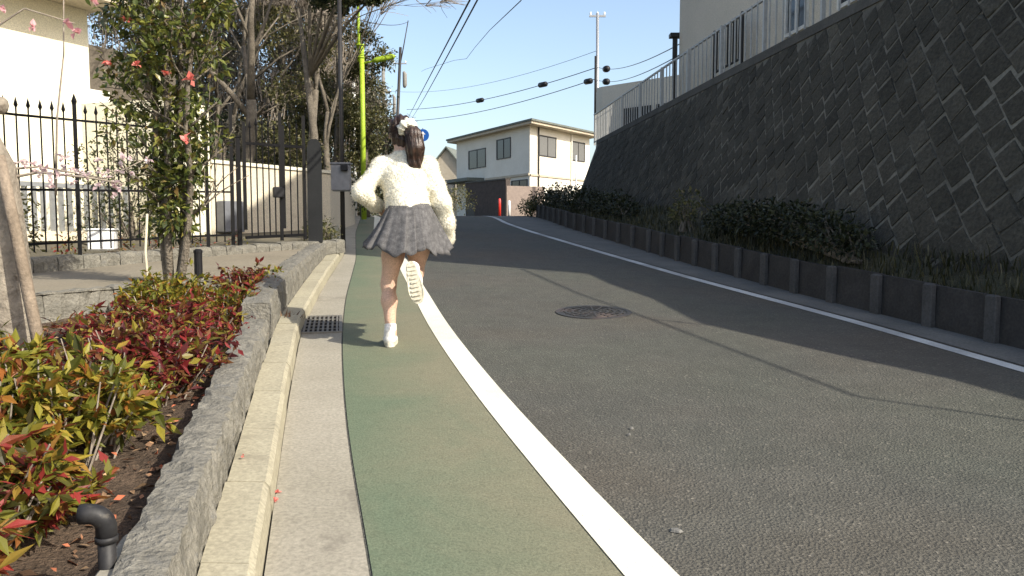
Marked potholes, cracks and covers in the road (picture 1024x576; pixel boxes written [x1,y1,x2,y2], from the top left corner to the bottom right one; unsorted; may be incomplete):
drain grate [301,315,342,335]
manhole cover [555,305,632,319]
